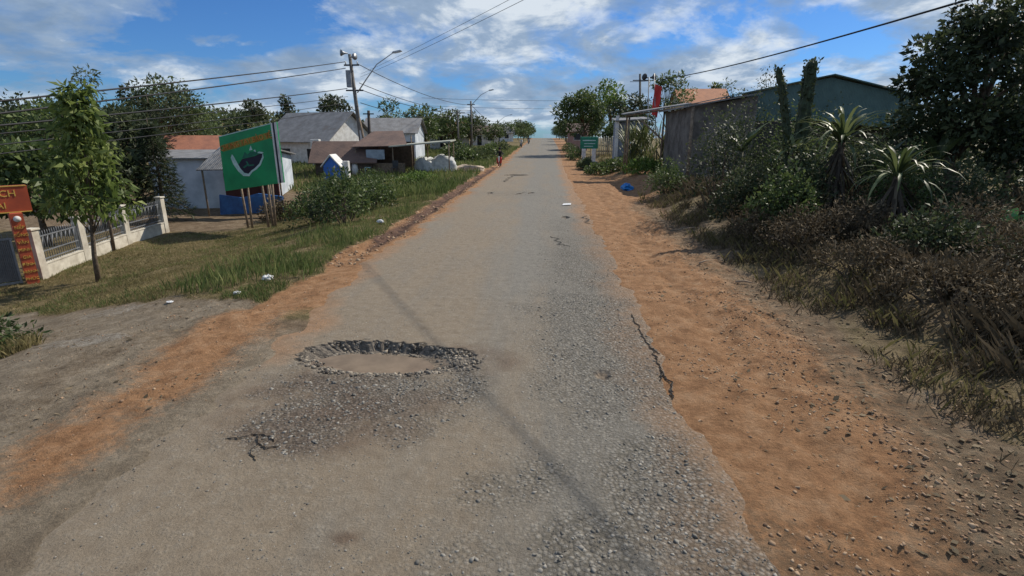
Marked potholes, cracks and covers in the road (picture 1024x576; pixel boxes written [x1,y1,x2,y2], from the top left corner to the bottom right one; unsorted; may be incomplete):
crack [550,215,591,246]
crack [631,314,675,399]
pothole [283,338,489,382]
crack [225,433,279,461]
